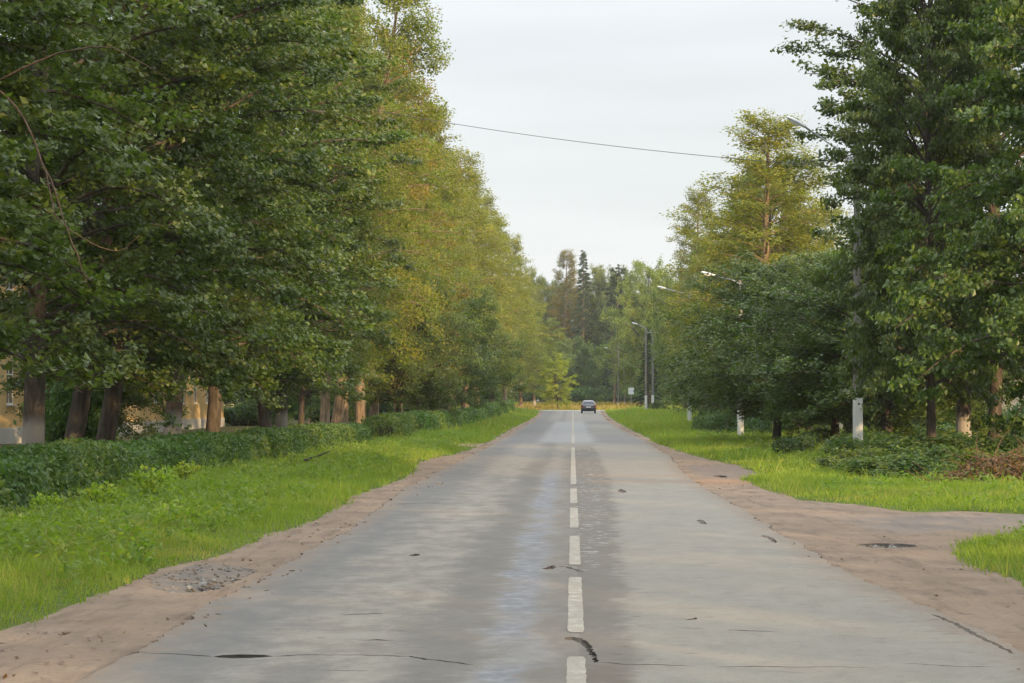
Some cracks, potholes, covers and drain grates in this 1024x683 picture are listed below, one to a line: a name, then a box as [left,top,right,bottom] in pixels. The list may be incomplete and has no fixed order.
crack [137,613,471,671]
crack [909,614,1014,667]
crack [607,646,684,666]
pothole [146,563,258,593]
